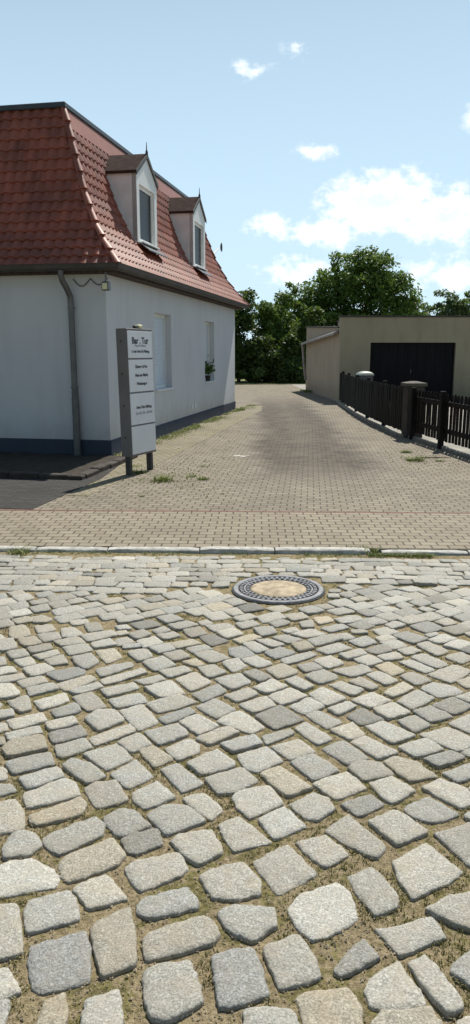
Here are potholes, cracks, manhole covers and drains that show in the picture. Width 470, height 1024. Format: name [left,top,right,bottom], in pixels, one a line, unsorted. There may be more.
manhole cover [232,575,325,605]
